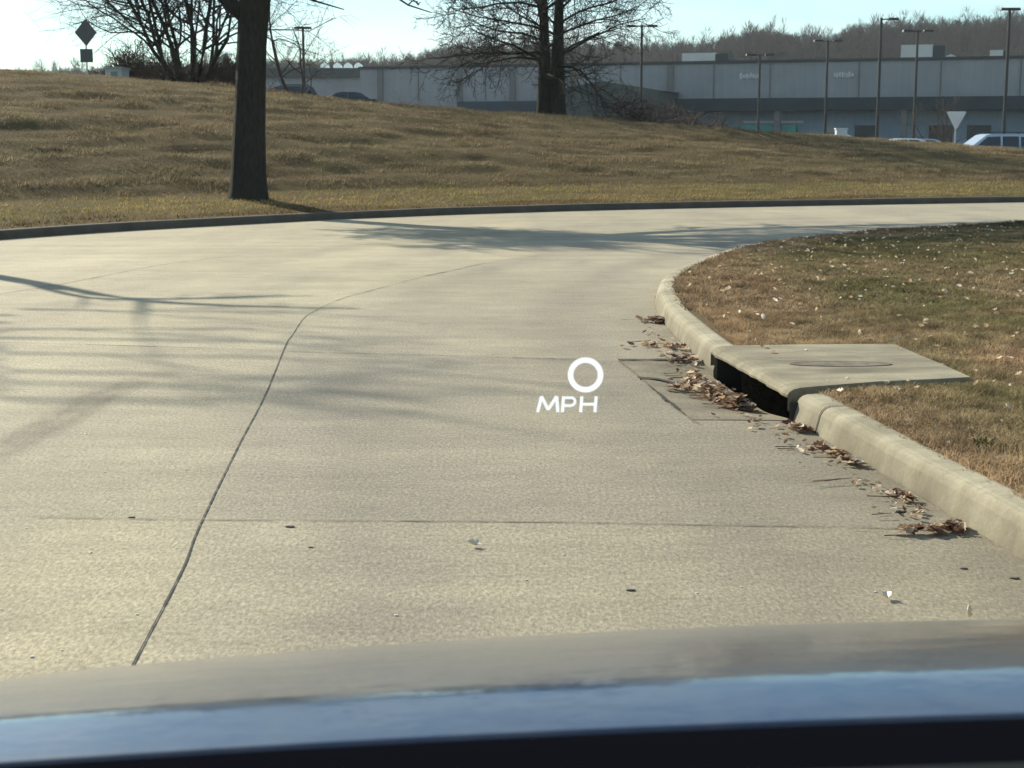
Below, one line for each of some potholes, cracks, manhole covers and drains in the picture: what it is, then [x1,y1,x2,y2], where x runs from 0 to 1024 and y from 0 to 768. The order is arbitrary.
drain grate [711,344,970,420]
